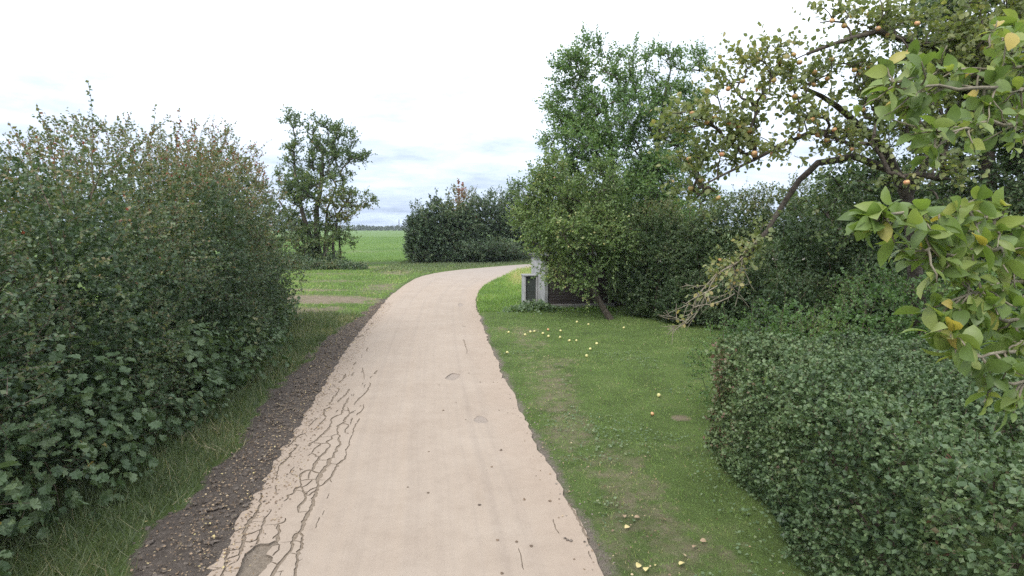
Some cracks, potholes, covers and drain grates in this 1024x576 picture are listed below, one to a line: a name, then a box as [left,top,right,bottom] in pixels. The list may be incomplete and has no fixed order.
crack [553,503,592,559]
pothole [236,541,280,576]
crack [215,323,378,576]
